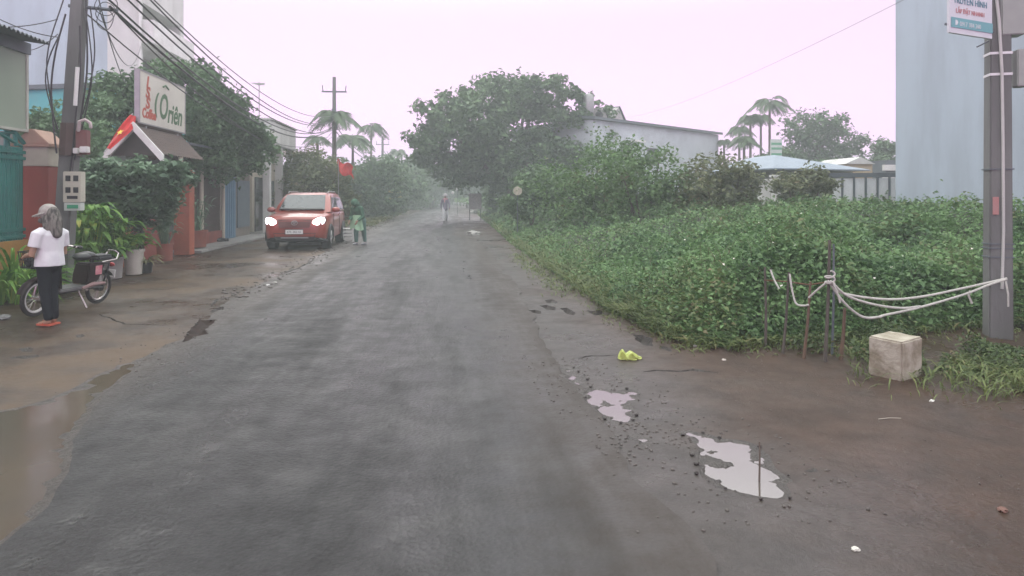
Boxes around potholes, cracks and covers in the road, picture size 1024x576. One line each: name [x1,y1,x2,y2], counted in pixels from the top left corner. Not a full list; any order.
pothole [182,319,217,342]
